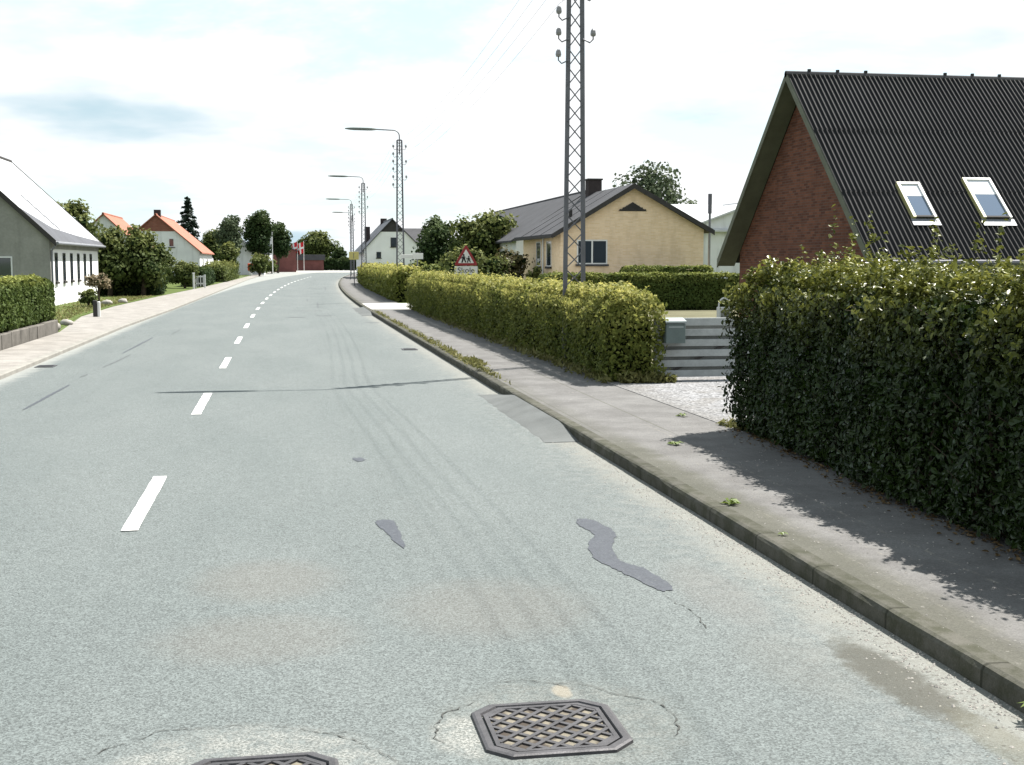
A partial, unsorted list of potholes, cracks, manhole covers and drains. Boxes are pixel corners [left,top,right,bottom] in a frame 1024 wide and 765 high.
manhole cover [471,699,634,760]
manhole cover [191,752,339,765]
crack [433,679,680,746]
crack [75,724,394,762]
